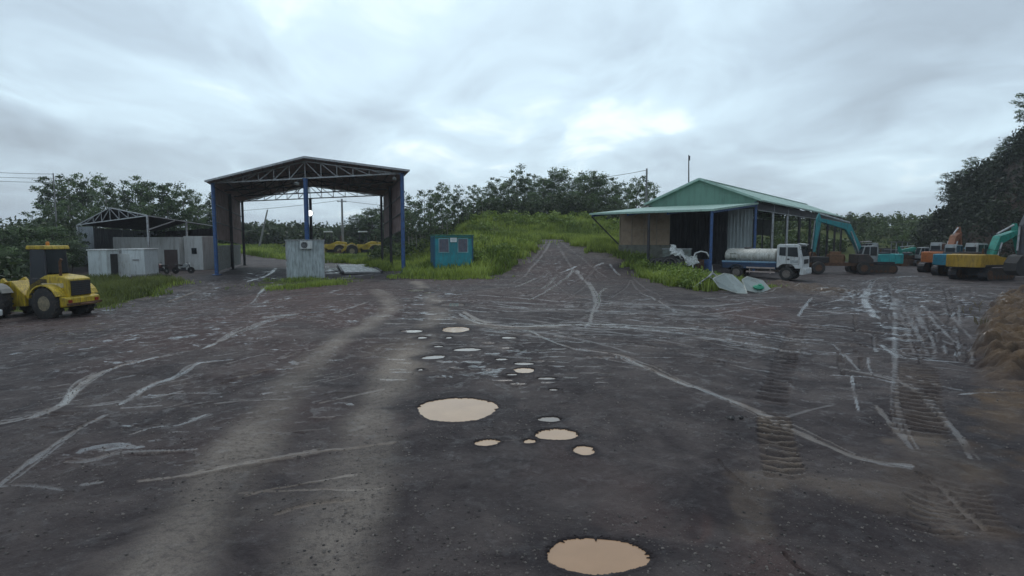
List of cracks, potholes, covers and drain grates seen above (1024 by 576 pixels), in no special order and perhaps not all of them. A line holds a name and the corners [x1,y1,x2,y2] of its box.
pothole [540,533,658,576]
pothole [568,444,598,457]
pothole [519,437,541,445]
pothole [534,415,565,423]
pothole [412,396,504,424]
pothole [471,438,504,447]
pothole [531,427,583,441]
